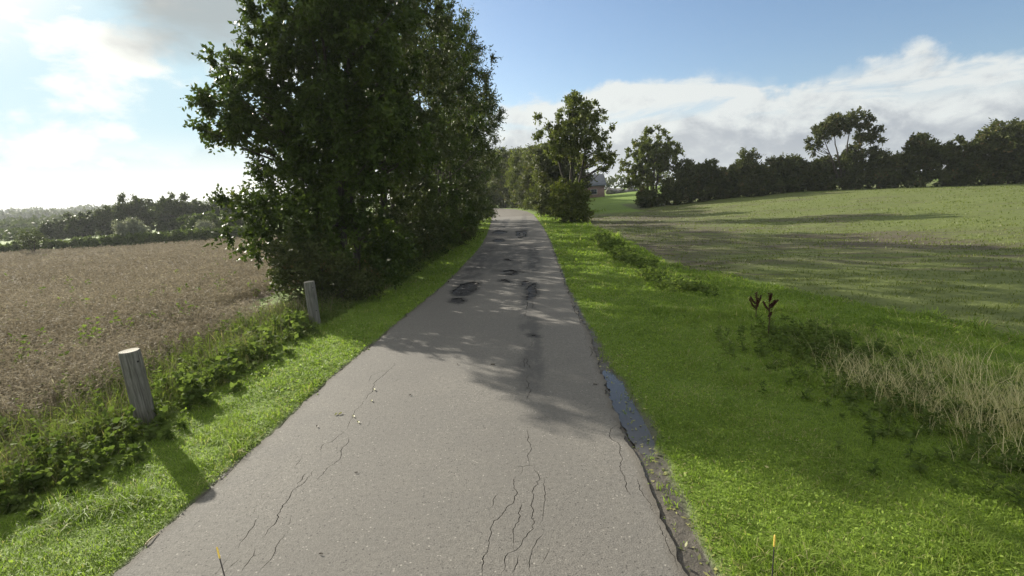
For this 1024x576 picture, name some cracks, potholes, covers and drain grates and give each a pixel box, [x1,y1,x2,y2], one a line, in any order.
pothole [526,283,537,300]
crack [216,364,395,574]
pothole [452,282,479,296]
crack [482,431,550,576]
